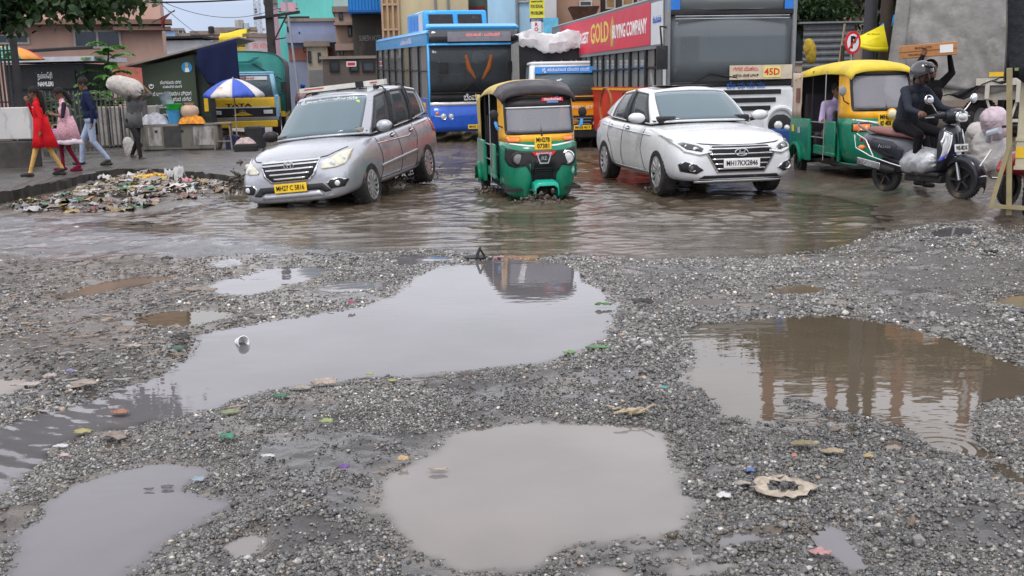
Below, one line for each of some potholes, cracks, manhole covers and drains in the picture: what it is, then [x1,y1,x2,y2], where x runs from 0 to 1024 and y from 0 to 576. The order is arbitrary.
pothole [58,275,170,300]
pothole [0,361,226,495]
pothole [365,422,737,576]
pothole [122,255,621,425]
pothole [677,315,1024,484]
pothole [4,461,230,576]
pothole [811,521,869,572]
